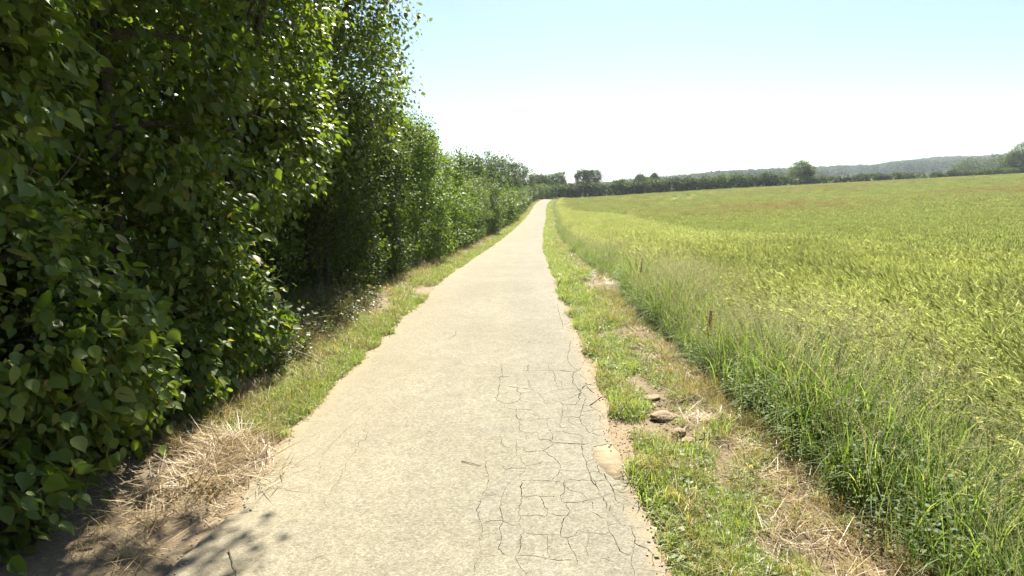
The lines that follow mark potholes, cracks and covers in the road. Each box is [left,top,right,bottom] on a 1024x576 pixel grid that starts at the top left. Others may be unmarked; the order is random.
crack [474,343,655,575]
